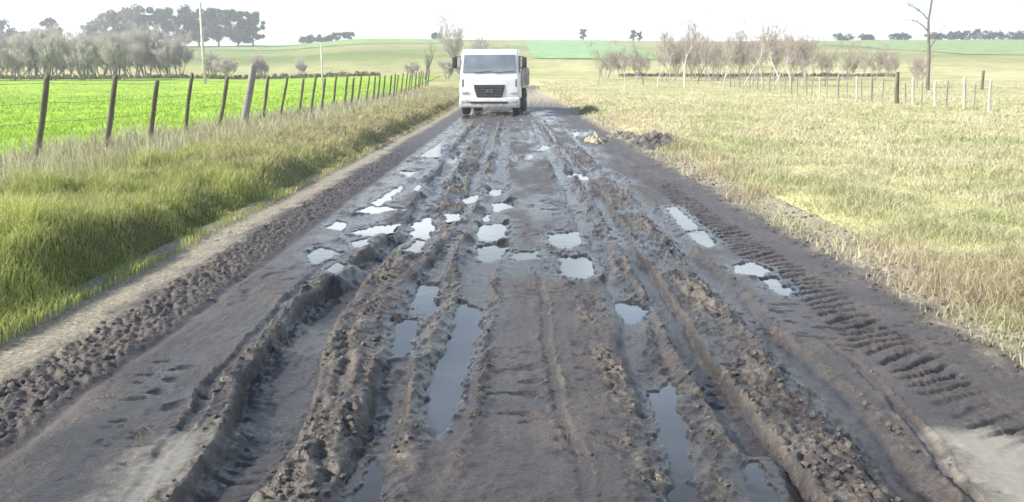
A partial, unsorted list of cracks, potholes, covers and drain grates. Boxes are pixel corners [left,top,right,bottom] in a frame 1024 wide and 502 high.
pothole [609,299,654,324]
pothole [474,220,511,243]
pothole [553,253,600,279]
pothole [415,297,491,439]
pothole [755,274,799,297]
pothole [726,260,776,277]
